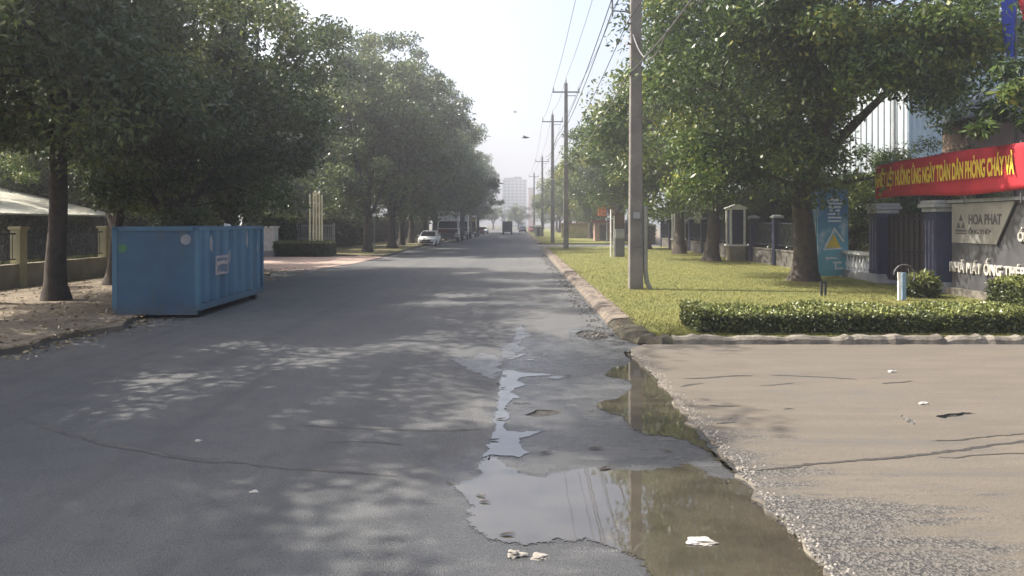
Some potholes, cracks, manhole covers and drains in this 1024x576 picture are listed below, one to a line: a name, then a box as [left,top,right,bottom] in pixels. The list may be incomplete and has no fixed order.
crack [680,375,753,387]
crack [297,424,478,445]
crack [755,433,1024,471]
pothole [575,330,613,340]
